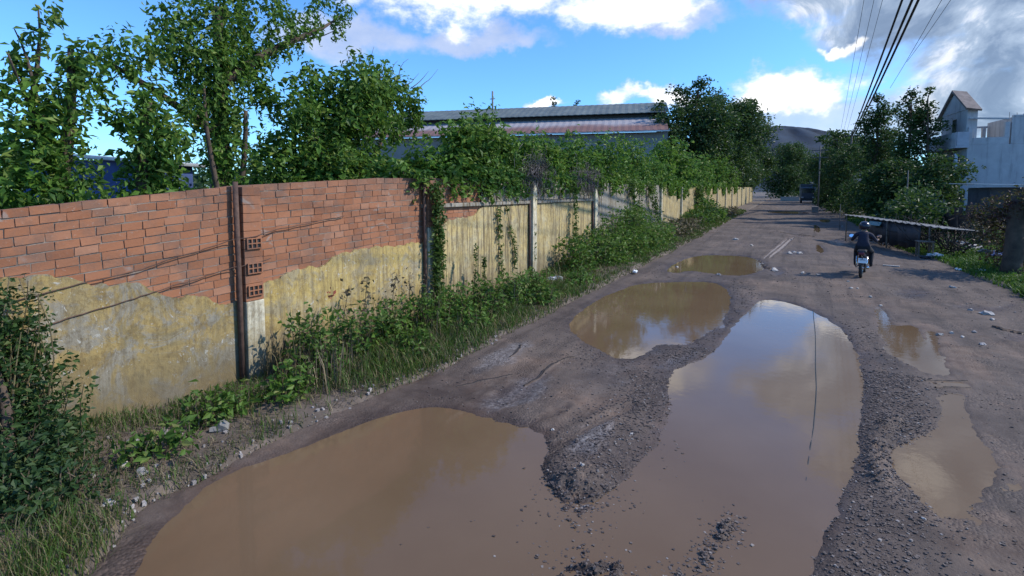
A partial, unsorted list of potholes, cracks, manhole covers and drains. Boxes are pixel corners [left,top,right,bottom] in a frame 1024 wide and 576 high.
pothole [874,389,1023,528]
crack [456,344,575,387]
pothole [118,297,875,576]
pothole [663,254,768,276]
pothole [562,280,736,361]
pothole [869,307,963,377]
